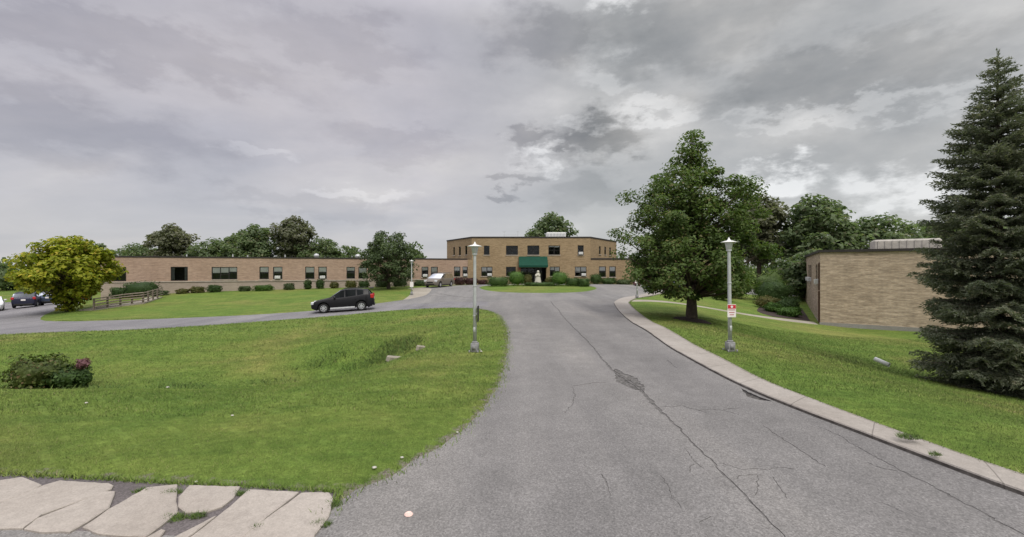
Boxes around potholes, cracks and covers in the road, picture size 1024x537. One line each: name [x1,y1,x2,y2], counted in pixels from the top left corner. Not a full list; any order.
crack [820,427,1024,535]
pothole [614,369,645,390]
crack [722,425,826,498]
